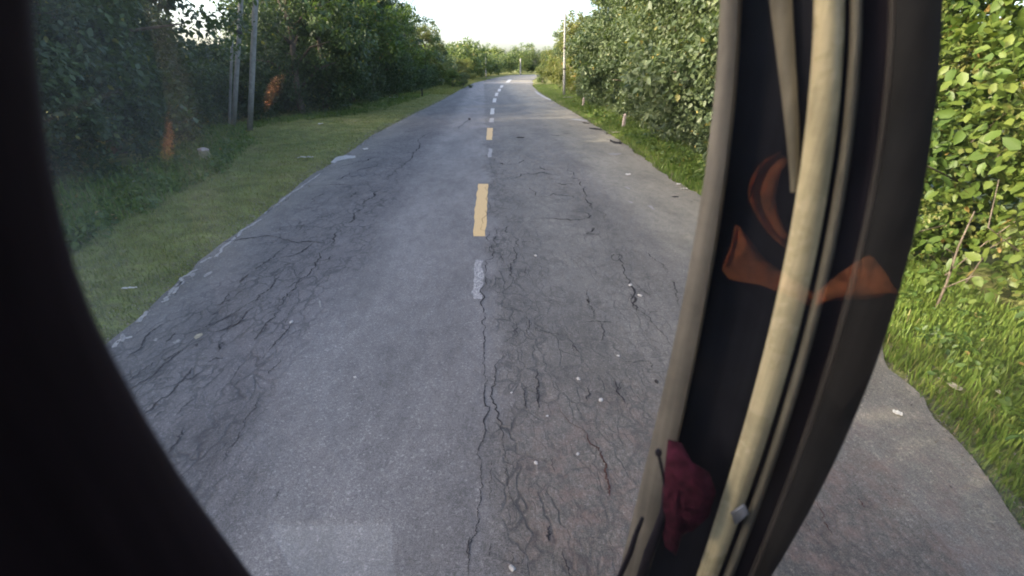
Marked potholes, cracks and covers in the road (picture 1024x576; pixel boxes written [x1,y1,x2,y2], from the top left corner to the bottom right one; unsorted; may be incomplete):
crack [129,128,434,453]
crack [546,526,570,574]
crack [488,226,605,507]
crack [614,360,653,403]
crack [611,252,673,347]
crack [500,161,606,234]
